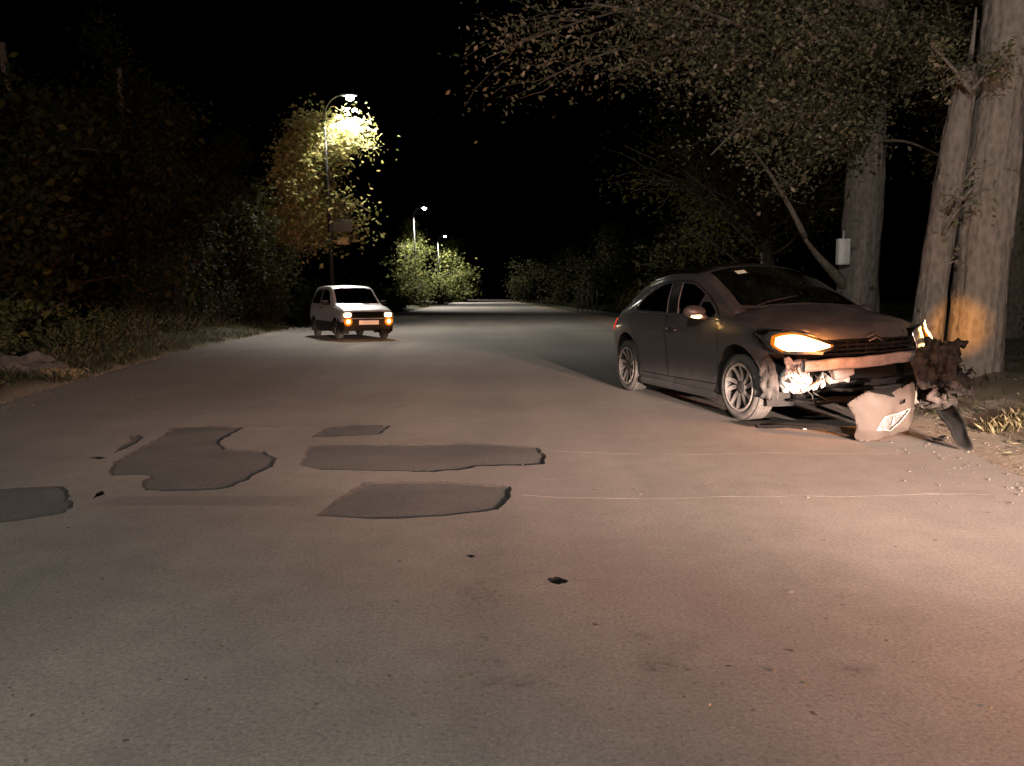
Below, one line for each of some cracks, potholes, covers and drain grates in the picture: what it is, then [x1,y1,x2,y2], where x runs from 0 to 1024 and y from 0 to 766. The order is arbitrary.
pothole [109,425,277,491]
